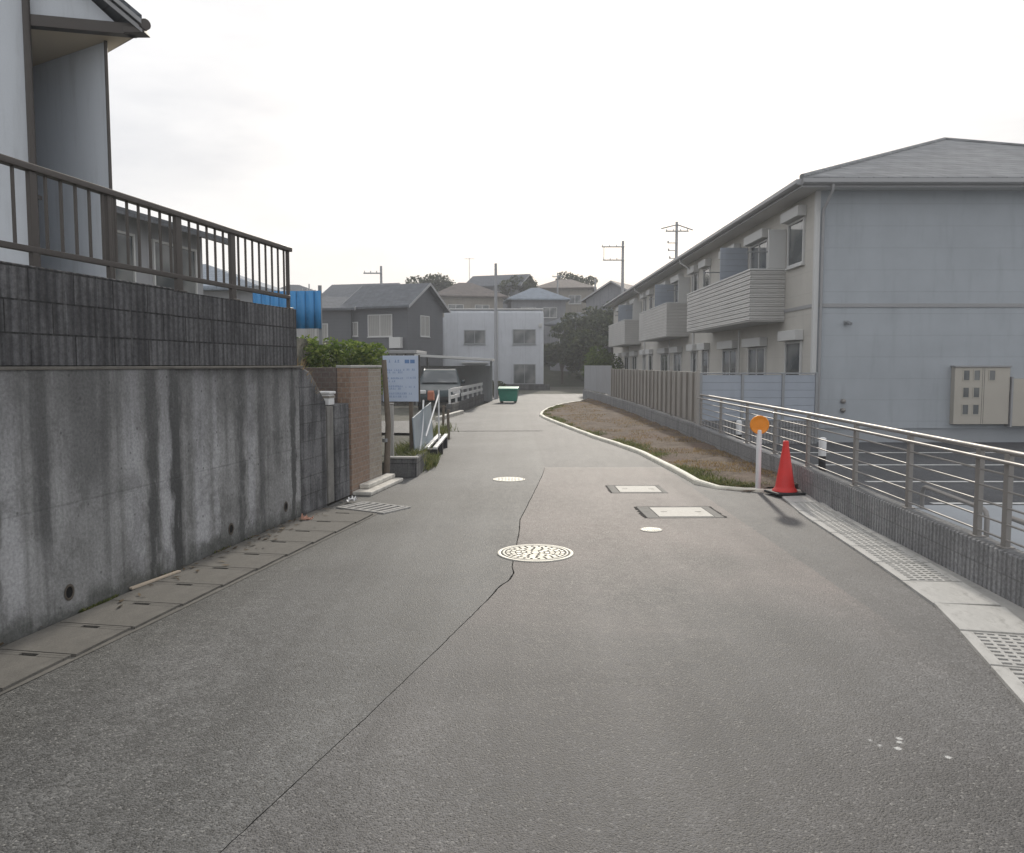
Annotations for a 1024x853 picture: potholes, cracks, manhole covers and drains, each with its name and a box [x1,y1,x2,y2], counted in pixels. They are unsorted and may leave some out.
manhole cover [497,544,574,562]
drain grate [336,501,411,514]
manhole cover [634,506,727,518]
manhole cover [605,485,668,493]
